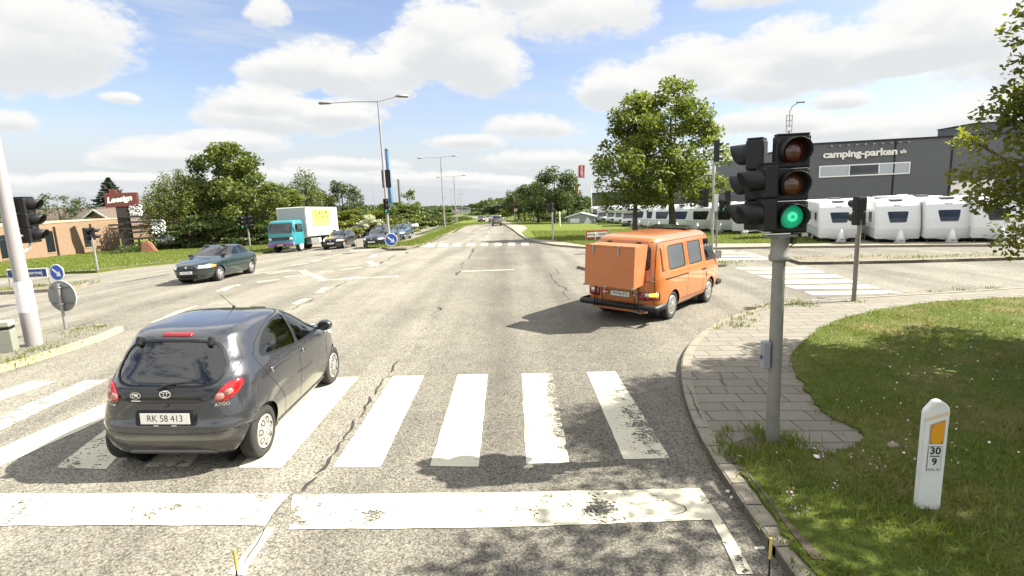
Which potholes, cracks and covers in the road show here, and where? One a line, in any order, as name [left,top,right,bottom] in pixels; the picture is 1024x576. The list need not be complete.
crack [241,360,399,568]
